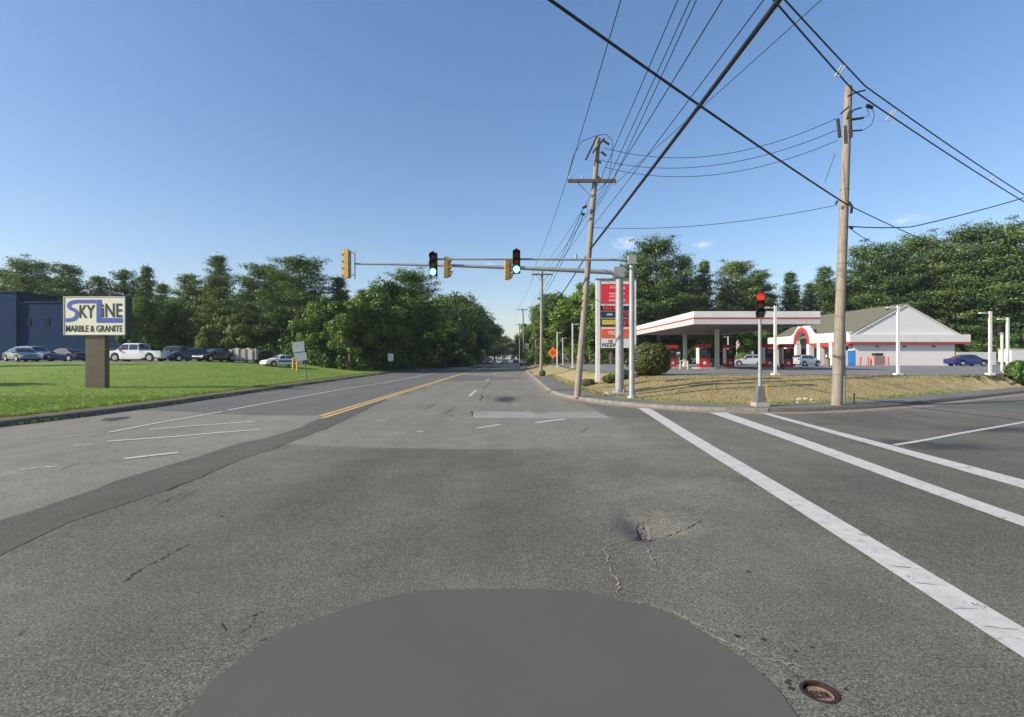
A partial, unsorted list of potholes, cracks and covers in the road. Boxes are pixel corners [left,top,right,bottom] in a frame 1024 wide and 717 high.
crack [425,383,491,416]
manhole cover [799,680,841,703]
crack [603,520,814,678]
pothole [628,522,652,542]
